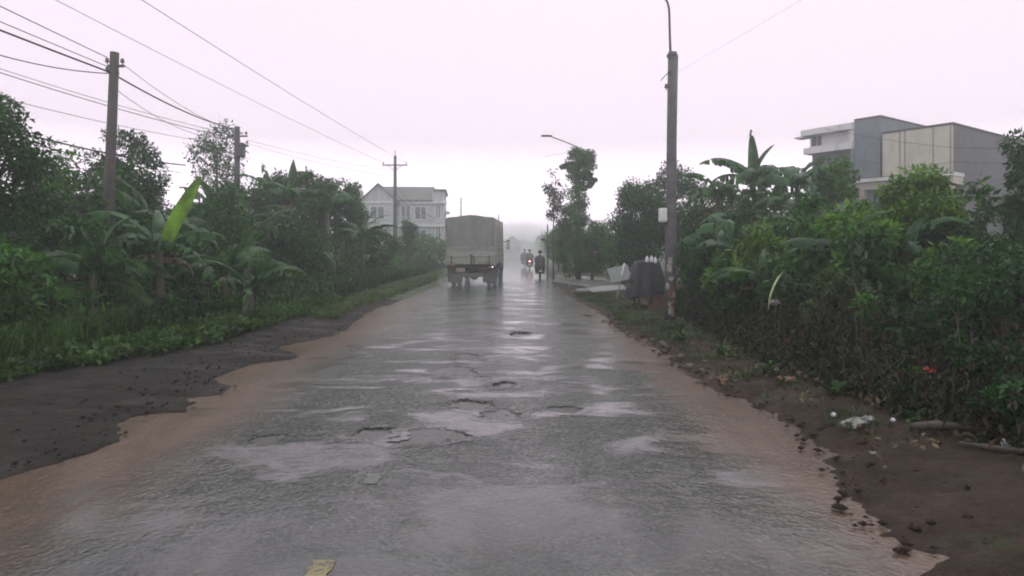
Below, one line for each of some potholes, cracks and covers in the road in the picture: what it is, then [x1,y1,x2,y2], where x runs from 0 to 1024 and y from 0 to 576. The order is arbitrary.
pothole [504,330,538,338]
pothole [417,365,489,379]
pothole [437,397,505,413]
pothole [535,404,593,416]
pothole [470,405,532,423]
pothole [482,379,524,390]
pothole [374,424,486,449]
pothole [332,424,411,444]
pothole [448,352,484,363]
